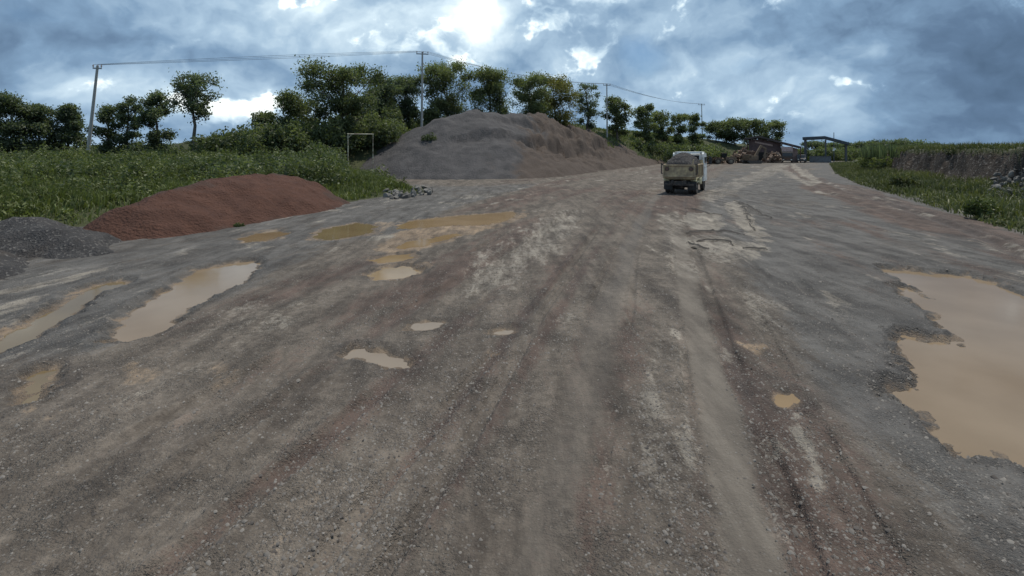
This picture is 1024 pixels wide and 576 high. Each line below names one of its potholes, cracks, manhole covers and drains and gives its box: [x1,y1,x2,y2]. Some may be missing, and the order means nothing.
pothole [388,231,468,251]
pothole [389,210,523,230]
pothole [0,274,142,357]
pothole [844,263,1024,468]
pothole [79,255,273,346]
pothole [231,229,297,244]
pothole [328,338,431,375]
pothole [0,355,84,413]
pothole [301,221,382,241]
